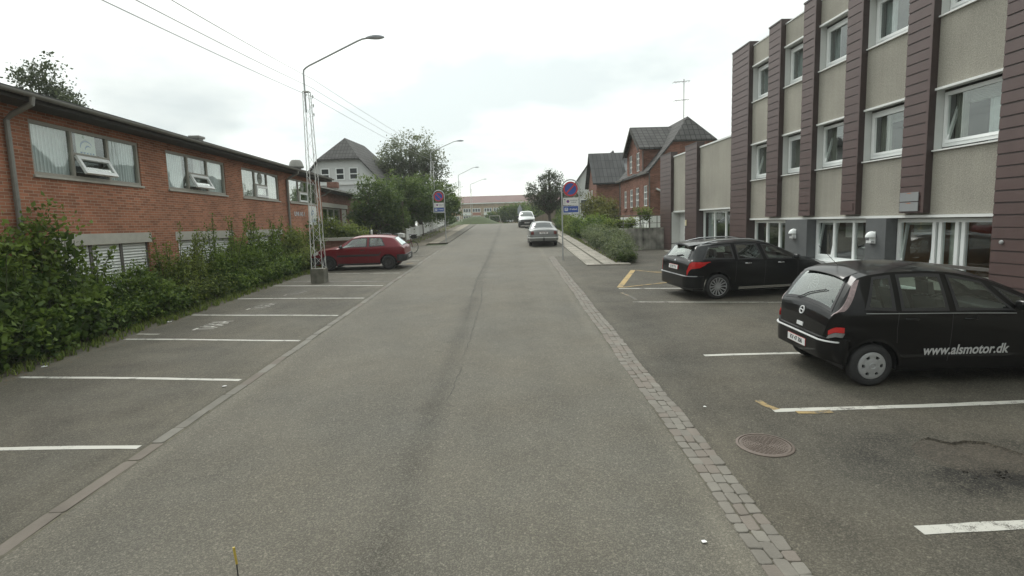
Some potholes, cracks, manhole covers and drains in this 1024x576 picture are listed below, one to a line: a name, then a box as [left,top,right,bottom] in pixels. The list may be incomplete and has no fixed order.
crack [440,246,493,400]
manhole cover [736,433,795,458]
